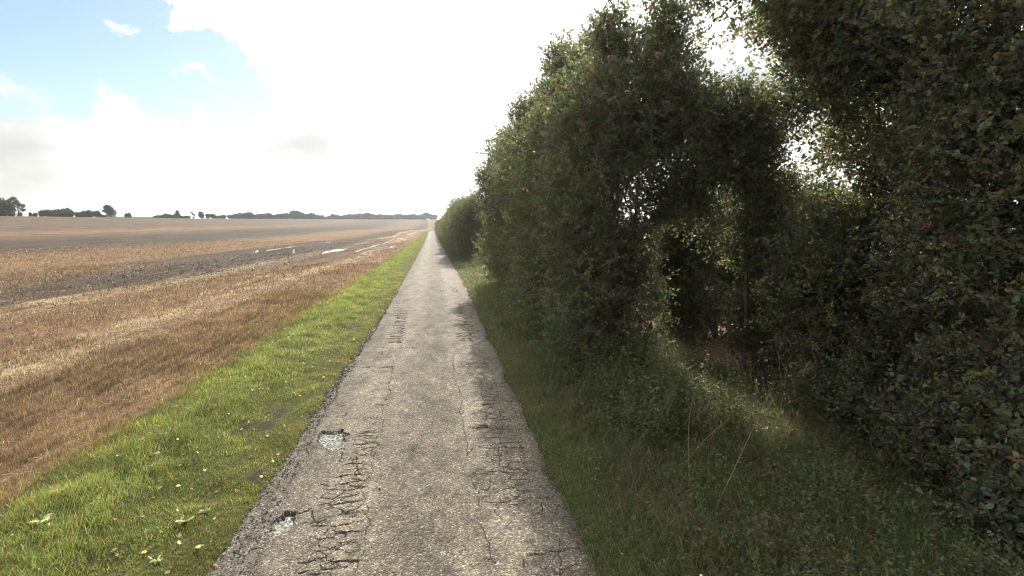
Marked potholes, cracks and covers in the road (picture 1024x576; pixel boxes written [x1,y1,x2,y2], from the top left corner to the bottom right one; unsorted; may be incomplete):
pothole [269,508,312,538]
crack [522,539,582,576]
crack [443,289,554,567]
pothole [316,429,351,451]
crack [297,300,408,576]
